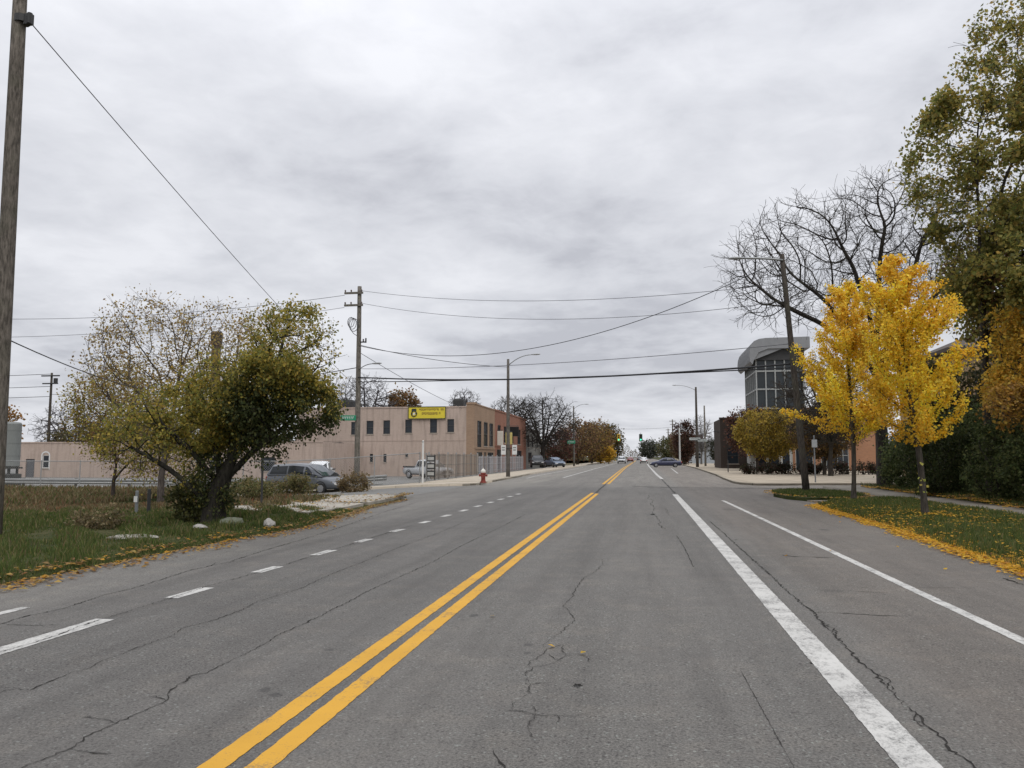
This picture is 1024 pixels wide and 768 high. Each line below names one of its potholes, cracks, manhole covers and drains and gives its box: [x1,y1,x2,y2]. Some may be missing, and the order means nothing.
crack [512,561,603,737]
crack [711,522,976,768]
crack [21,514,525,768]
